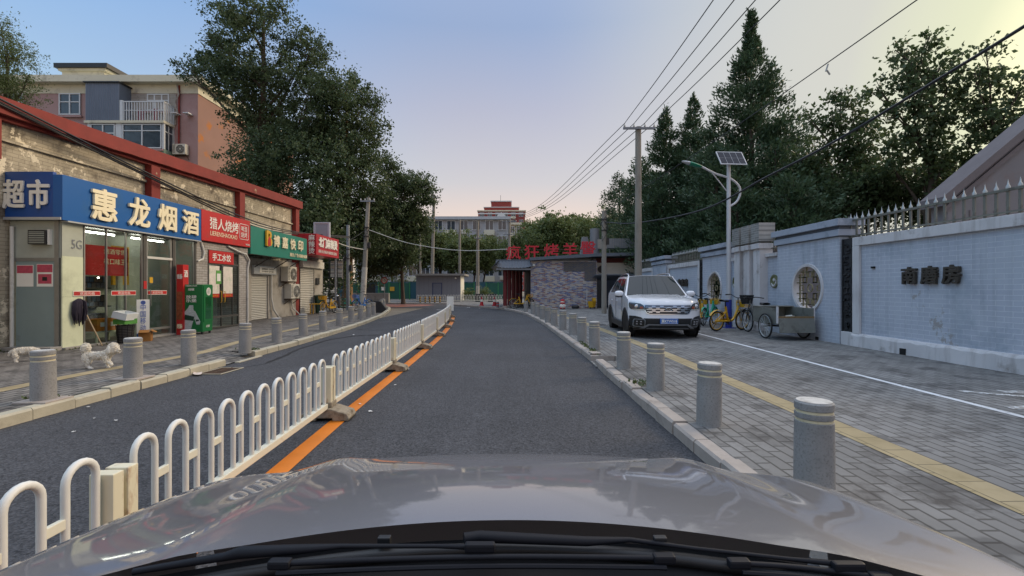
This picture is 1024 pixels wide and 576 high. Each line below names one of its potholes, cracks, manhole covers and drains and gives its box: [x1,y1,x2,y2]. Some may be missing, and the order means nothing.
drain grate [199,367,244,375]
